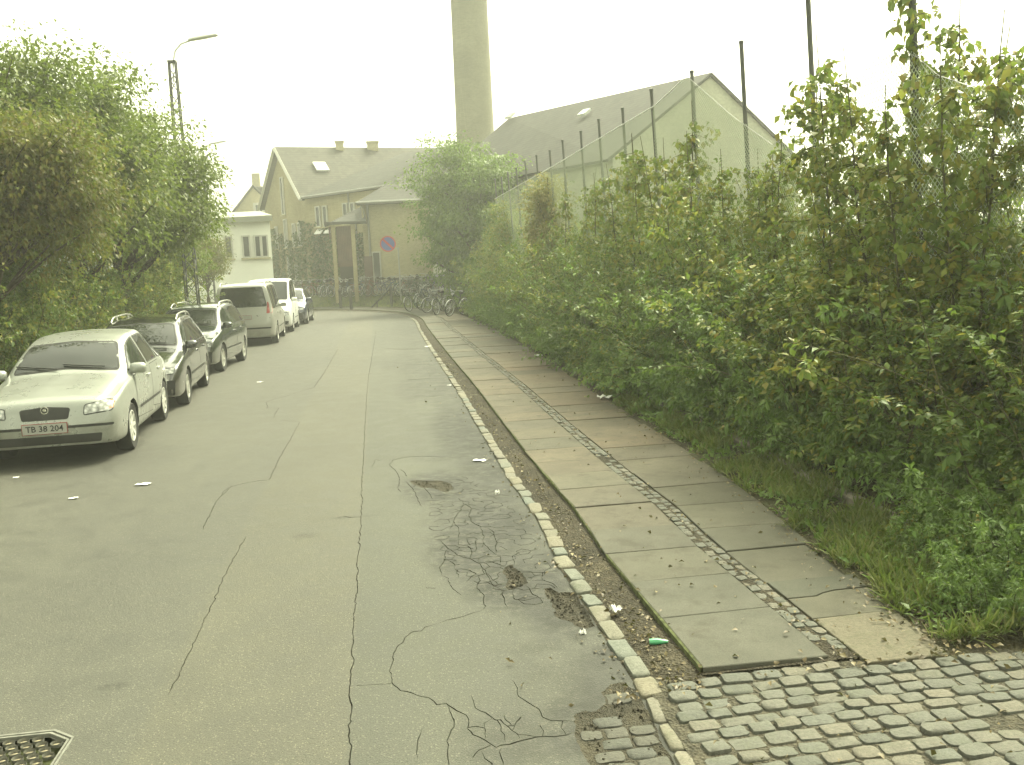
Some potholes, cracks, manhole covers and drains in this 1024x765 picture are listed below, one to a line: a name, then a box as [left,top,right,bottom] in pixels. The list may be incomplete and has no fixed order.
crack [203,350,338,529]
pothole [544,588,595,629]
crack [168,537,246,695]
crack [344,332,571,765]
pothole [503,565,528,590]
pothole [410,480,453,493]
